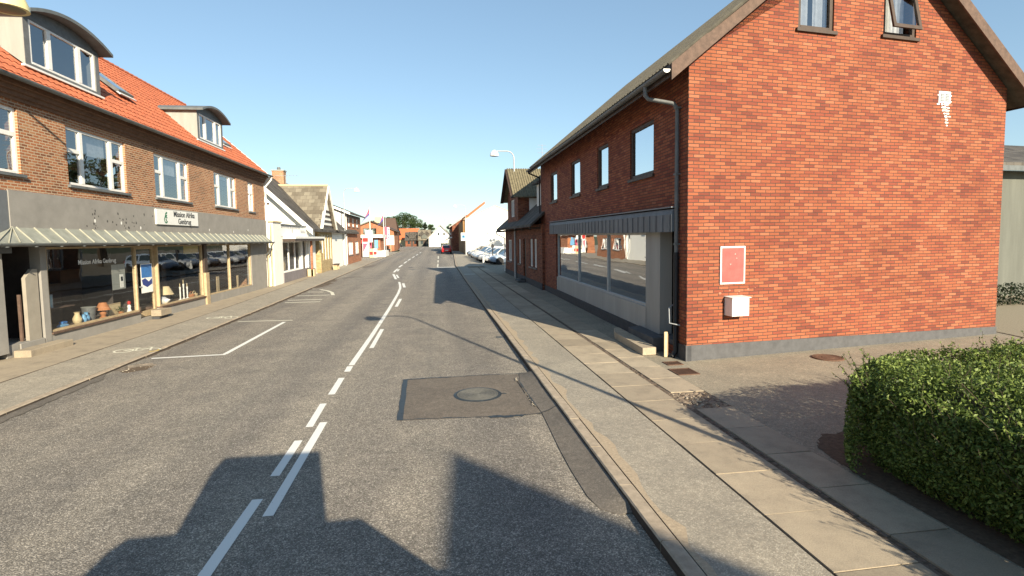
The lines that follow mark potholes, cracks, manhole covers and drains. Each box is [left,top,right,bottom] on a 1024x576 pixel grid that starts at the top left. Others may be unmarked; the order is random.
manhole cover [453,387,507,402]
manhole cover [811,354,845,362]
